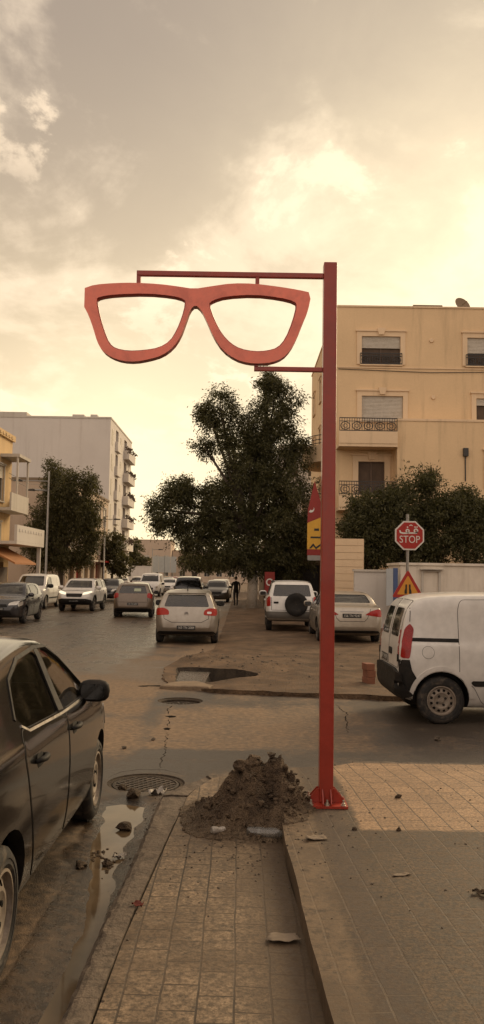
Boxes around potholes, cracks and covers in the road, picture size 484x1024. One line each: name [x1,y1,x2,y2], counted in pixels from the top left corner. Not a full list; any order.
manhole cover [107,774,185,792]
crack [110,706,172,777]
pothole [175,667,258,683]
